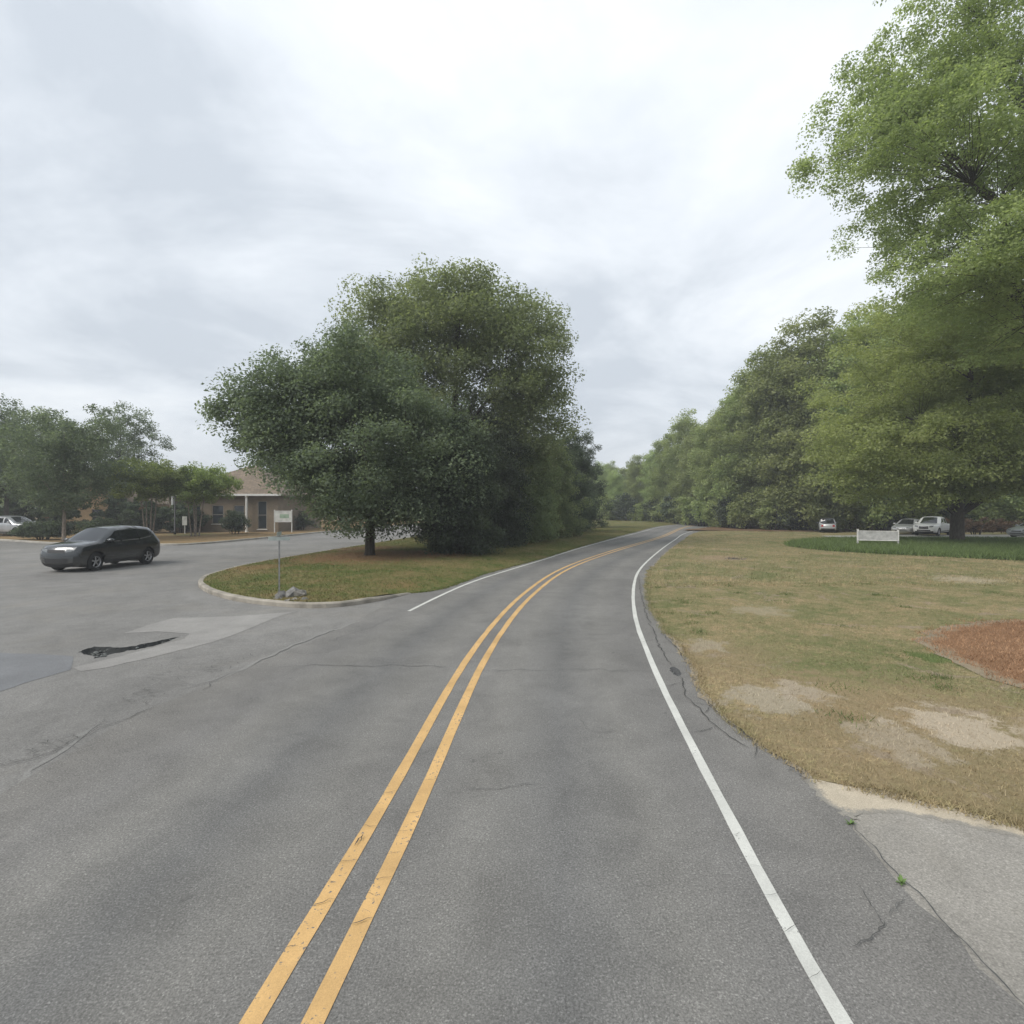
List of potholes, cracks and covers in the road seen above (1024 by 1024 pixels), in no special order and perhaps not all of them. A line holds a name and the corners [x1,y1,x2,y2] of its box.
crack [638,581,765,754]
crack [853,886,903,946]
crack [0,630,305,766]
pothole [80,637,178,659]
